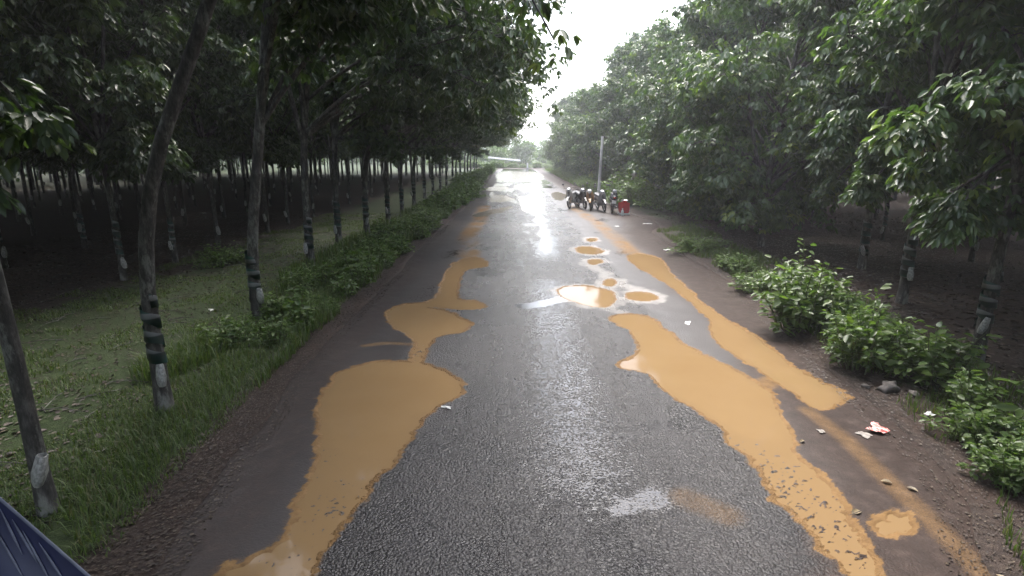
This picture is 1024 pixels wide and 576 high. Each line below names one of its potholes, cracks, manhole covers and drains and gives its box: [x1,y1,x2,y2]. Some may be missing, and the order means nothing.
pothole [625,253,858,412]
pothole [601,278,619,287]
pothole [554,284,619,308]
pothole [574,246,606,254]
pothole [863,505,923,541]
